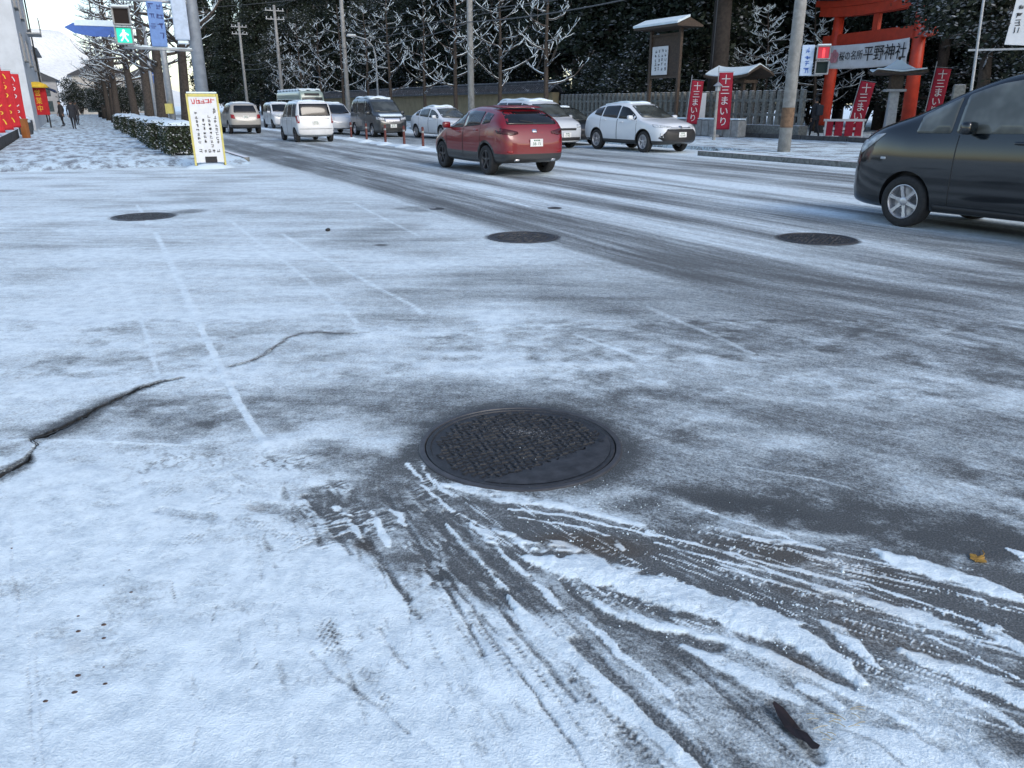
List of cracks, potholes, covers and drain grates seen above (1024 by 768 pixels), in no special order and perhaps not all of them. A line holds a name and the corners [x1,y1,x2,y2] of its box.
manhole cover [487,231,557,243]
manhole cover [778,232,858,245]
manhole cover [110,212,175,221]
crack [0,332,351,478]
manhole cover [419,406,626,492]
